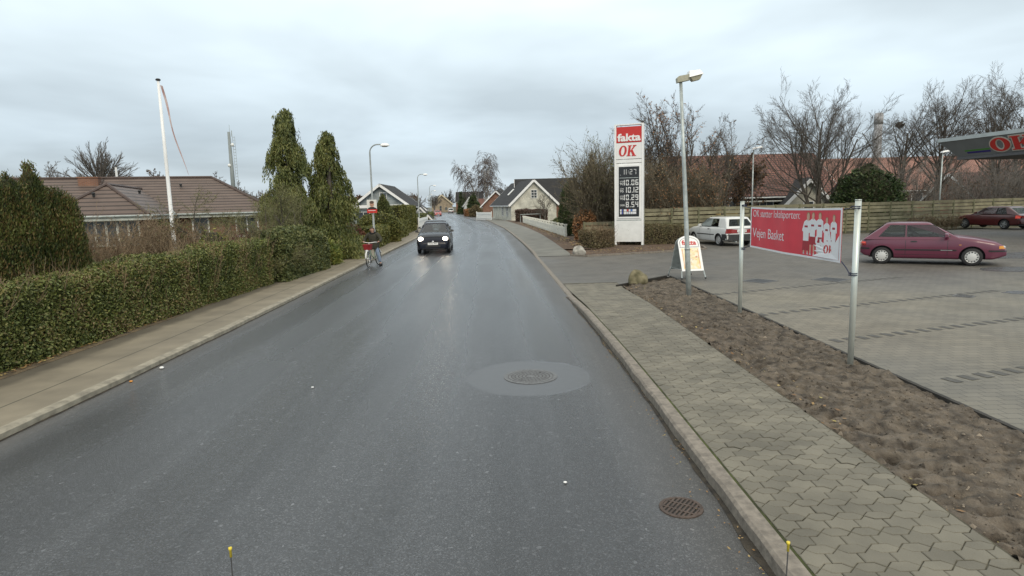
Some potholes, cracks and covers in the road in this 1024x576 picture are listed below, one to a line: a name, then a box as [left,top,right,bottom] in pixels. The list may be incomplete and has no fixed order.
manhole cover [504,369,557,384]
drain grate [659,497,704,519]
